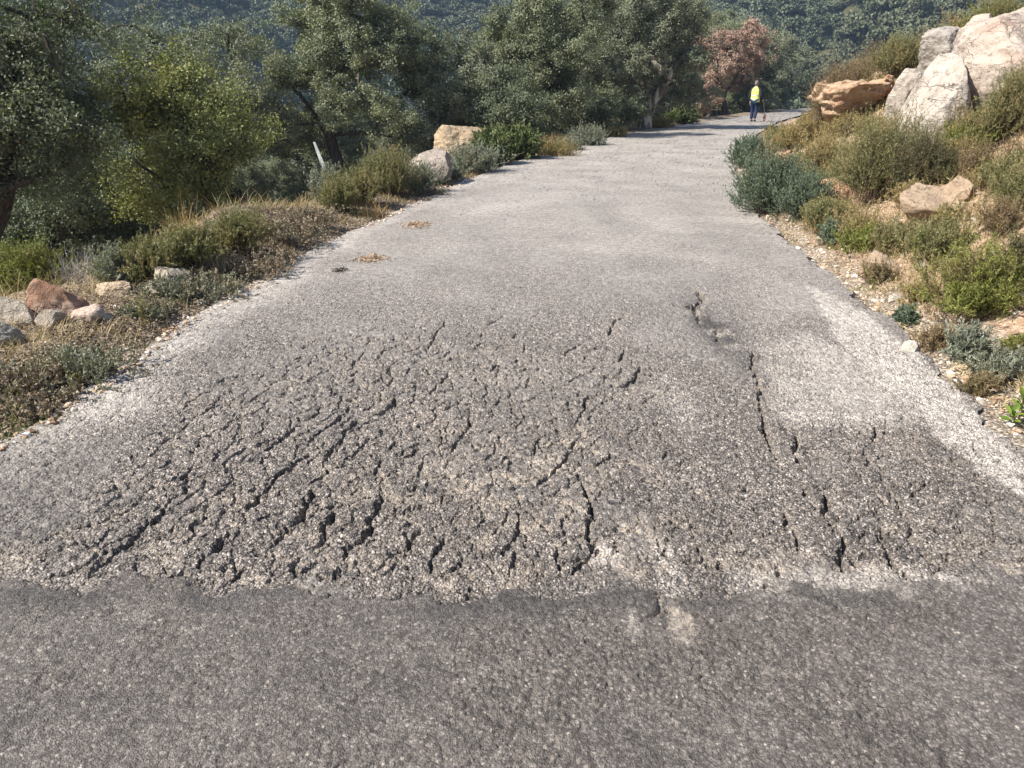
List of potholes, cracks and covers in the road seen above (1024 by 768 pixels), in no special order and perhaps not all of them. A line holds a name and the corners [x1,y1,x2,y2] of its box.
crack [31,315,1024,601]
